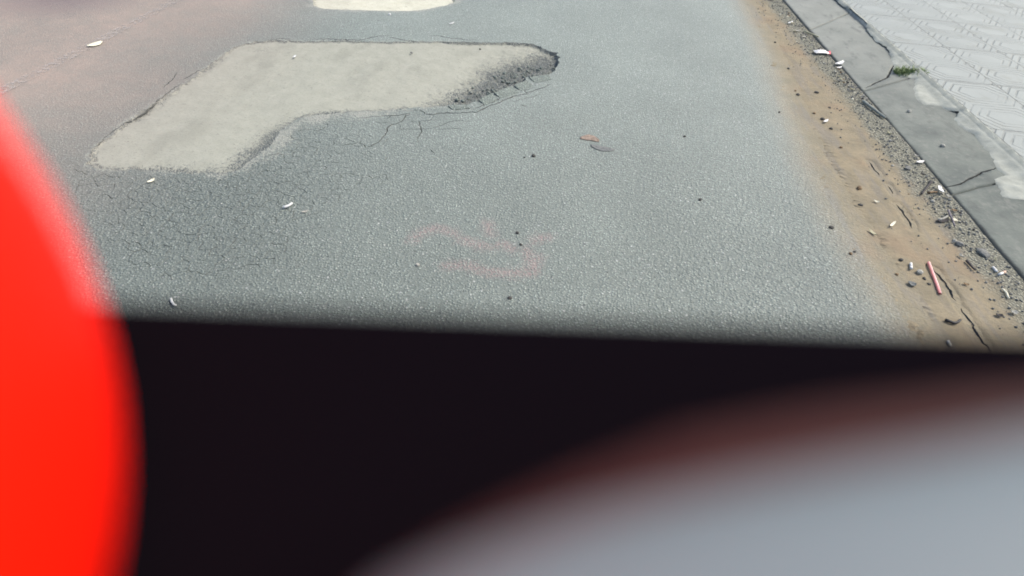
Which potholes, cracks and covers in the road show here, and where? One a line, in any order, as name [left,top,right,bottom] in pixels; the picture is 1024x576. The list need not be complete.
pothole [85,40,560,175]
crack [342,86,546,154]
